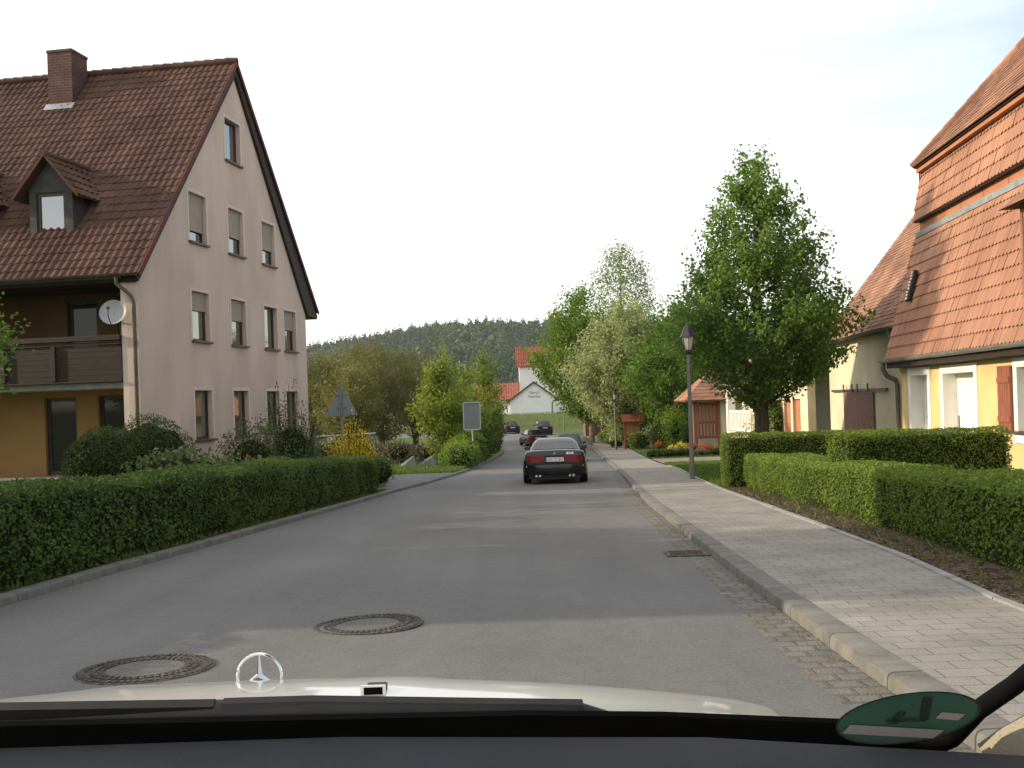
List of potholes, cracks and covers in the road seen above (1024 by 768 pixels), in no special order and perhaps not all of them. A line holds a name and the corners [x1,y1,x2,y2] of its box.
manhole cover [73,653,216,685]
manhole cover [312,613,424,636]
